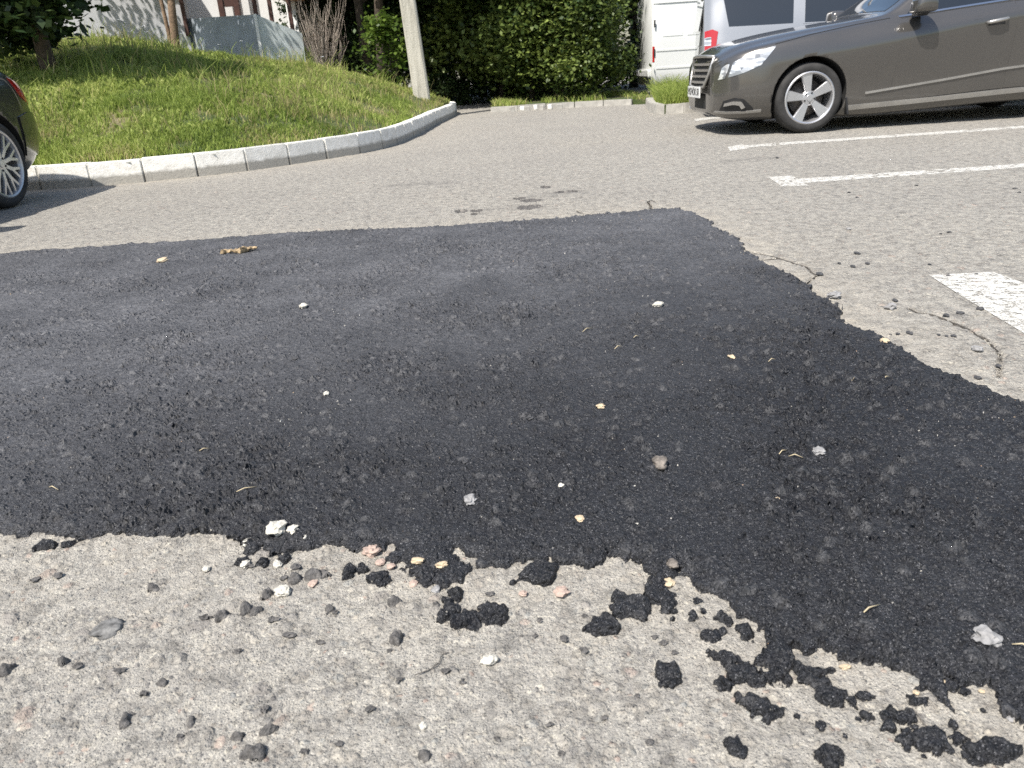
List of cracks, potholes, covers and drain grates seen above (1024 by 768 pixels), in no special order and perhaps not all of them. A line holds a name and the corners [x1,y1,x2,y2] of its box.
crack [745,250,818,284]
crack [909,308,1002,374]
